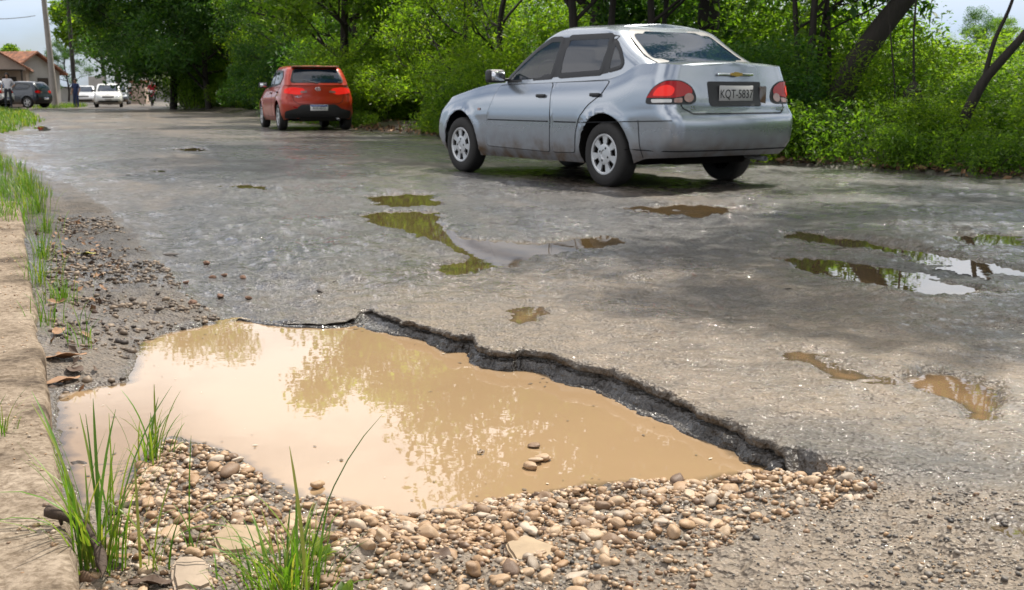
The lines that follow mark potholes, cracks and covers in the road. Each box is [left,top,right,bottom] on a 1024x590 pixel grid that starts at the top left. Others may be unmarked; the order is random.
pothole [891,362,1016,424]
pothole [48,307,819,518]
pothole [755,341,899,385]
